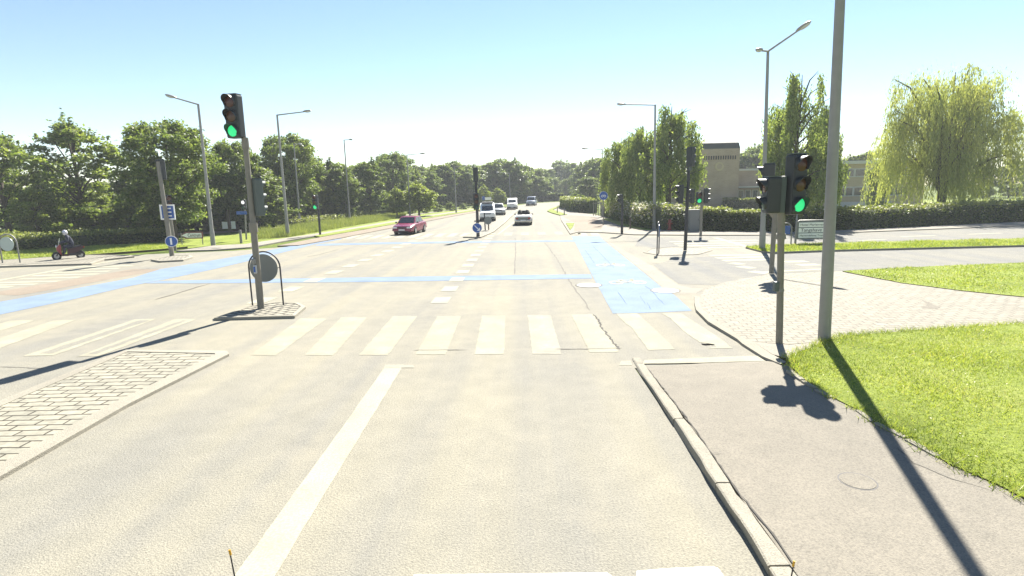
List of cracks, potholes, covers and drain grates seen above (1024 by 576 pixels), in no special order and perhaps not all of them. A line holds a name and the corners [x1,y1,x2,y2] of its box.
manhole cover [837,472,879,490]
crack [545,243,620,349]
